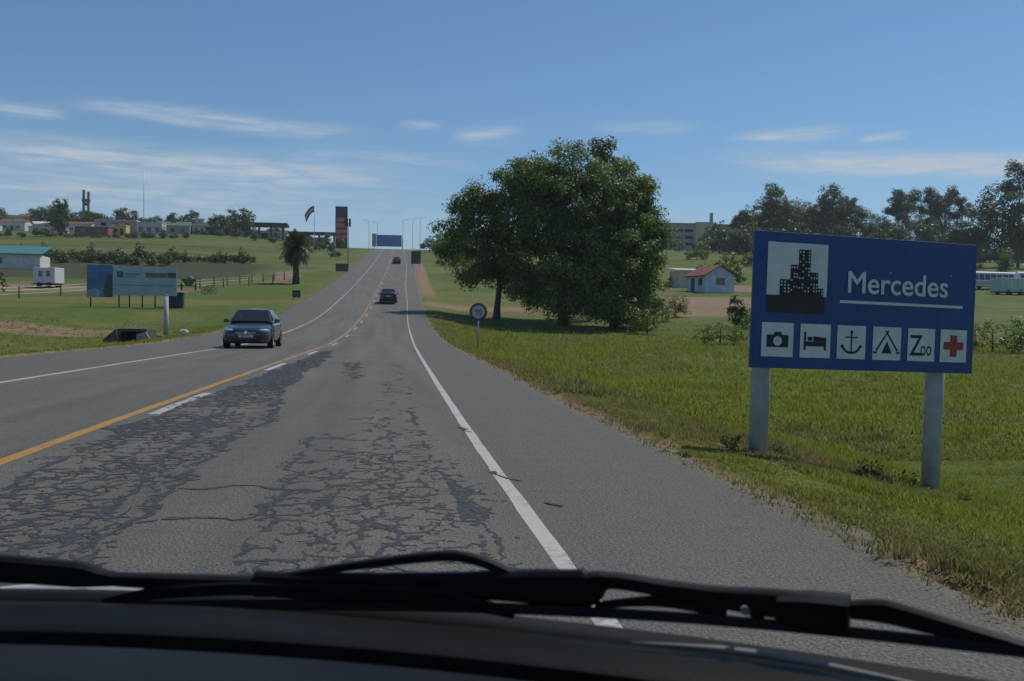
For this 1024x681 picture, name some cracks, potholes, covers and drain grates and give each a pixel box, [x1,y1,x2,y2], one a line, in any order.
crack [342,362,363,383]
